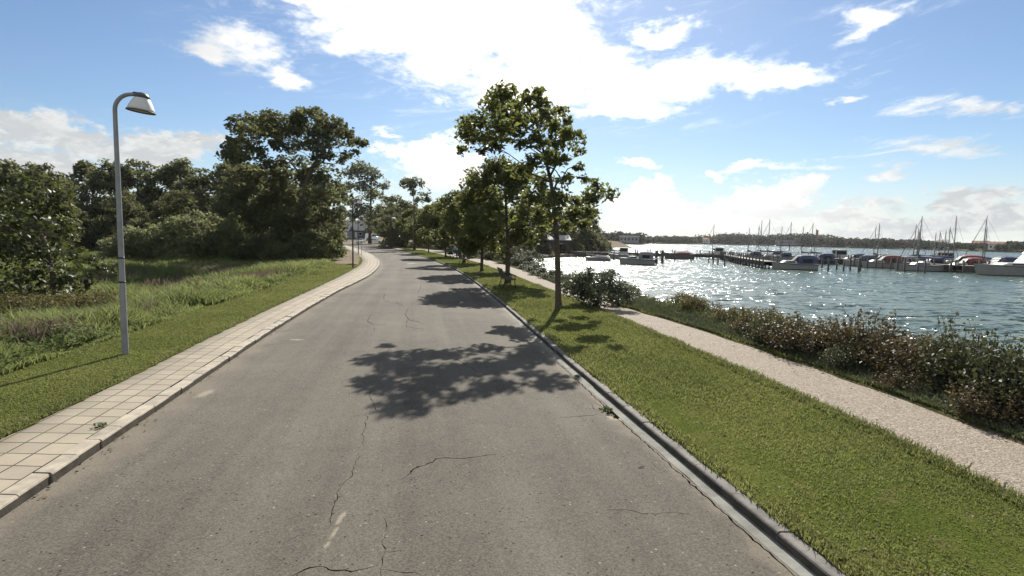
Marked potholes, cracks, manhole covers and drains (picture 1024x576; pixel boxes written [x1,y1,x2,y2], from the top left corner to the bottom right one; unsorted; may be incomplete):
crack [293,519,420,576]
crack [403,454,496,479]
crack [328,392,378,529]
